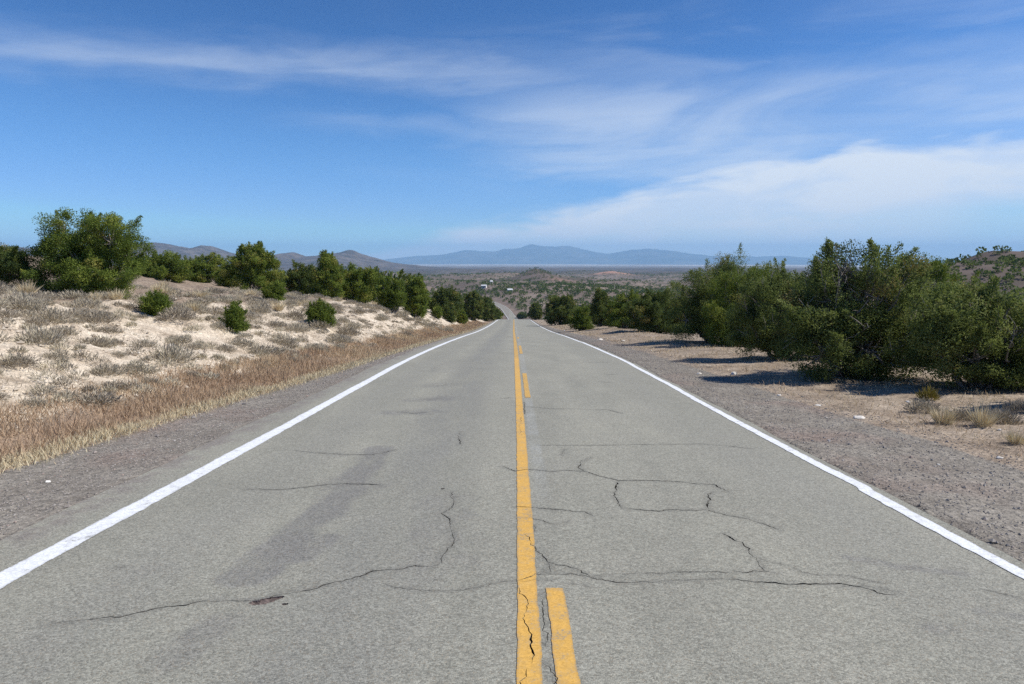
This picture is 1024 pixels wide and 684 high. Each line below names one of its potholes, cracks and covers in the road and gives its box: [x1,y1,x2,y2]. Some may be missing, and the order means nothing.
crack [48,493,454,625]
pothole [249,596,285,605]
crack [505,444,776,529]
crack [519,588,558,684]
crack [387,533,897,595]
